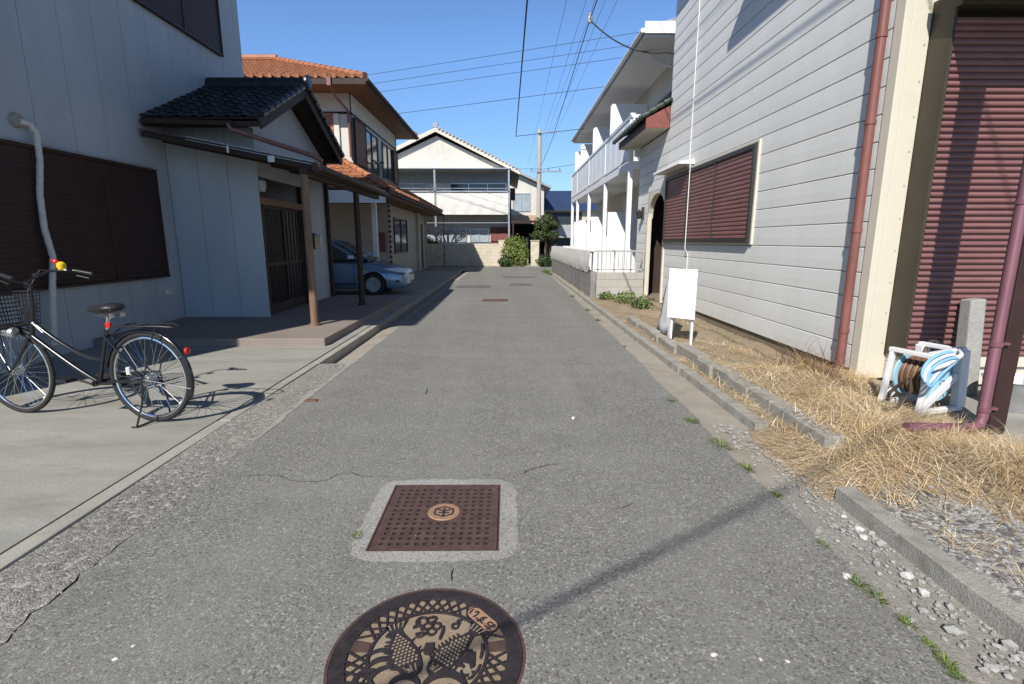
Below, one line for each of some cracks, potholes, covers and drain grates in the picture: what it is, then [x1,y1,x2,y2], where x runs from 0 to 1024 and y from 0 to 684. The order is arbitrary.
crack [248,472,374,482]
manhole cover [350,479,518,563]
manhole cover [323,588,526,684]
crack [0,532,138,646]
